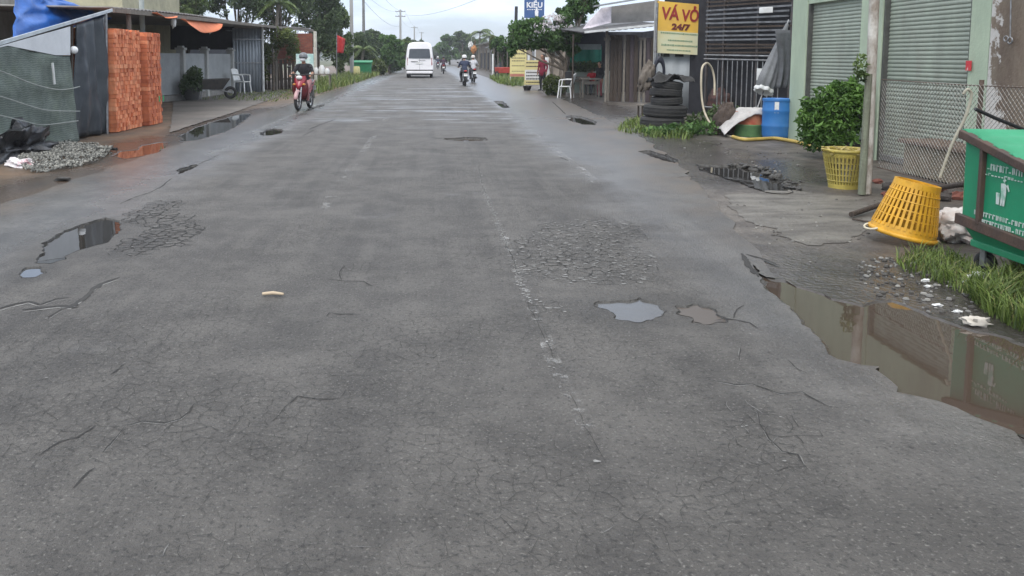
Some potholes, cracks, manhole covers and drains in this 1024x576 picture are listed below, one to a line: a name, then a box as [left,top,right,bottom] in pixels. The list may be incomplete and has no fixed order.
crack [0,141,864,576]
pothole [638,150,678,163]
pothole [566,115,597,125]
pothole [19,266,47,278]
pothole [35,217,122,264]
pothole [675,303,728,325]
pothole [696,163,803,194]
pothole [594,297,666,323]
pothole [260,128,284,136]
